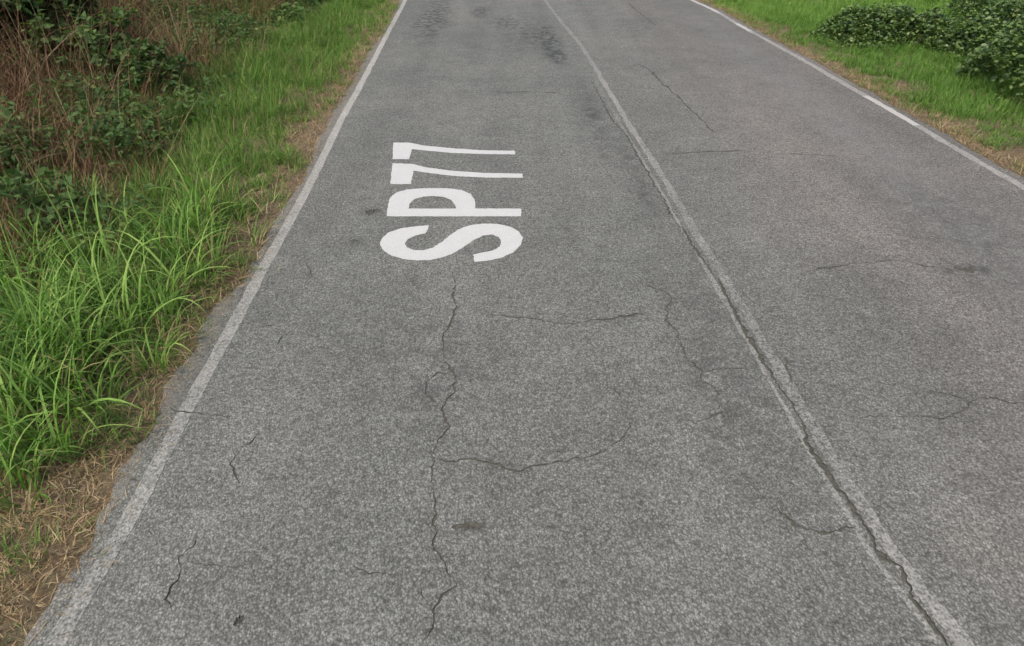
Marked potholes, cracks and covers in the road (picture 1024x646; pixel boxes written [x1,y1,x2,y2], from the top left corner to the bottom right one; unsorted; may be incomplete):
crack [144,527,262,609]
crack [816,260,990,273]
crack [230,428,264,483]
crack [860,390,1024,426]
crack [766,497,861,535]
crack [349,268,635,638]
crack [492,285,752,422]
crack [624,64,715,133]
